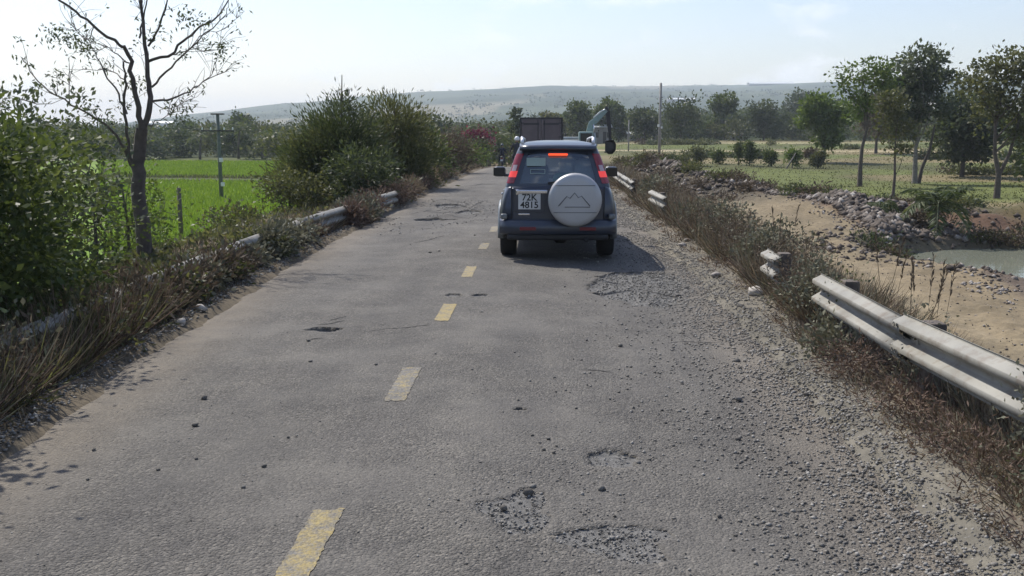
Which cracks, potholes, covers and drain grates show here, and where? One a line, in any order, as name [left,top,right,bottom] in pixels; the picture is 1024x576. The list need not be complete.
pothole [297,326,352,334]
pothole [573,445,651,474]
pothole [578,271,691,311]
pothole [530,519,692,573]
pothole [458,482,567,545]
